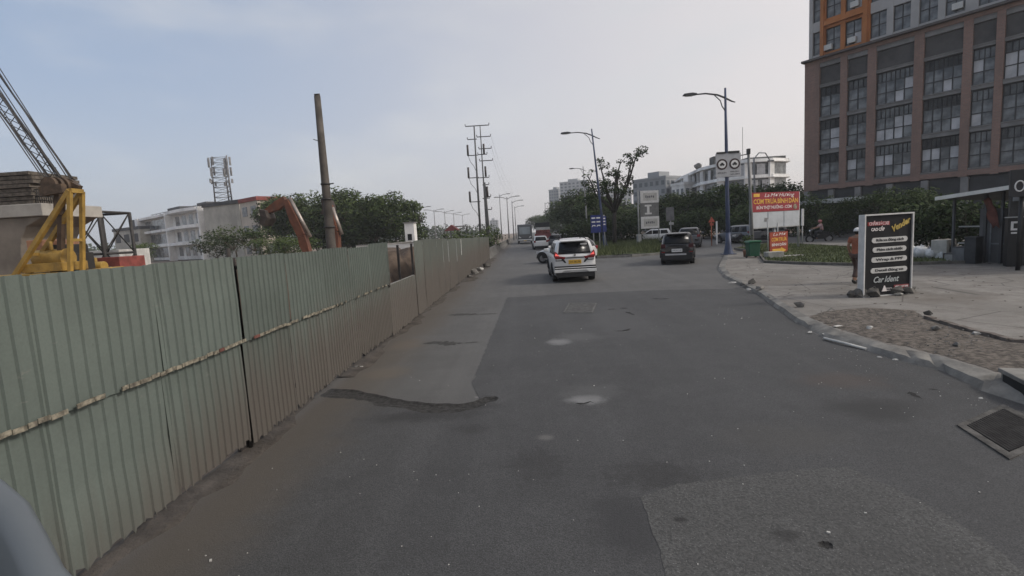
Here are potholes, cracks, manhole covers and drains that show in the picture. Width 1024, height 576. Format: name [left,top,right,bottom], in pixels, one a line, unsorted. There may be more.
manhole cover [563,303,597,313]
